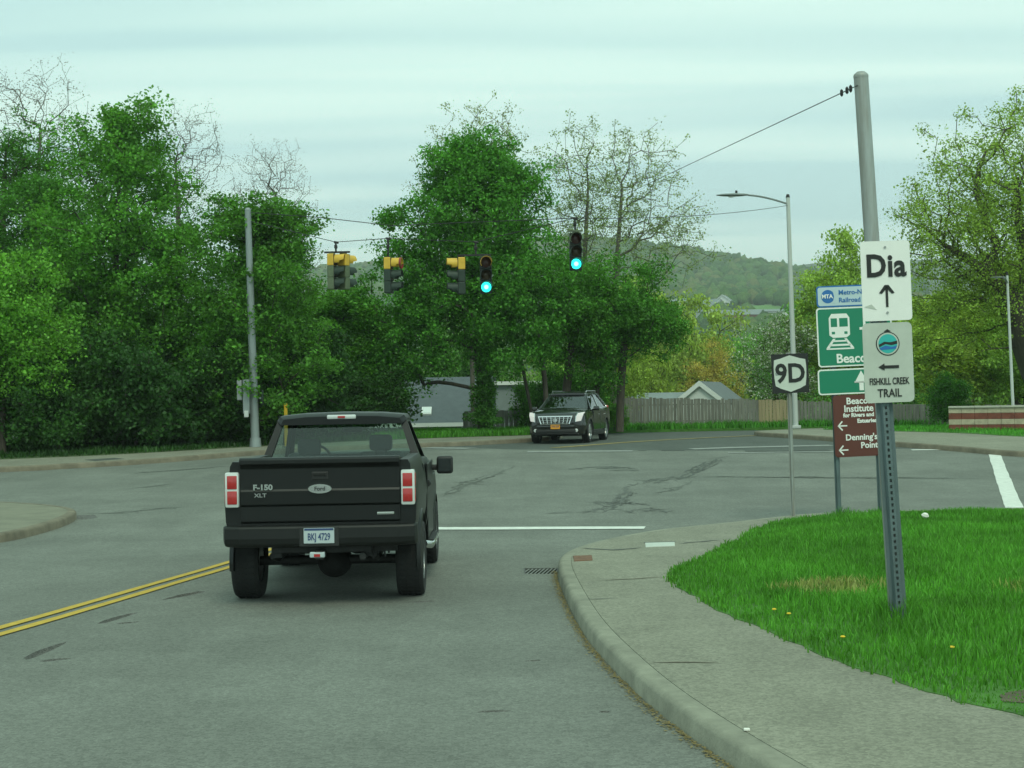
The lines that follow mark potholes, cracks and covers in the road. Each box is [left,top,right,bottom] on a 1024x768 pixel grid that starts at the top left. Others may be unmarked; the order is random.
crack [545,456,971,514]
crack [444,467,513,496]
